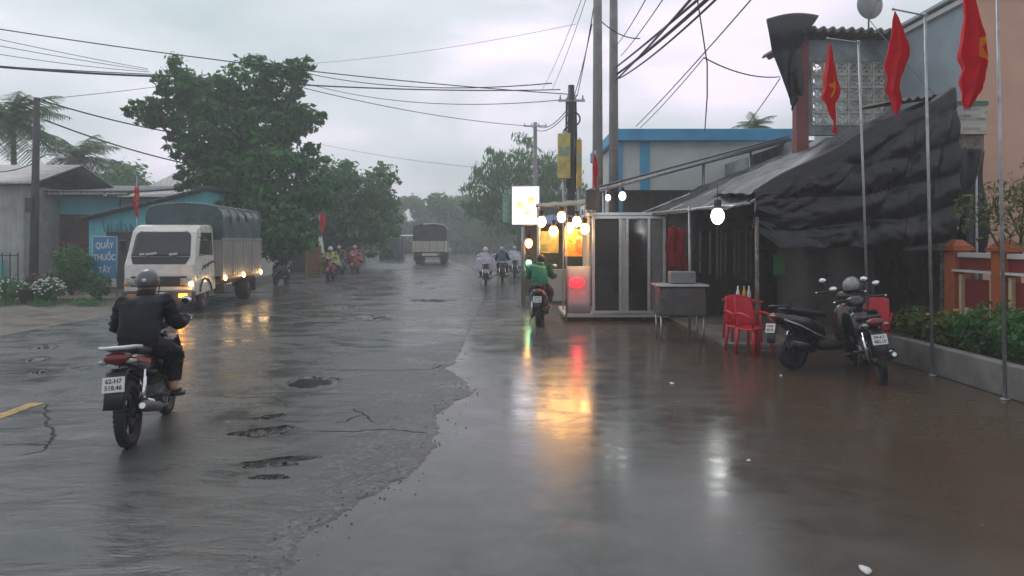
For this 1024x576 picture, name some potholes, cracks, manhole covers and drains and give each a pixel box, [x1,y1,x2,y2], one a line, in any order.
pothole [238,456,323,469]
crack [320,409,425,433]
pothole [283,376,342,388]
pothole [224,425,296,438]
crack [4,405,58,456]
